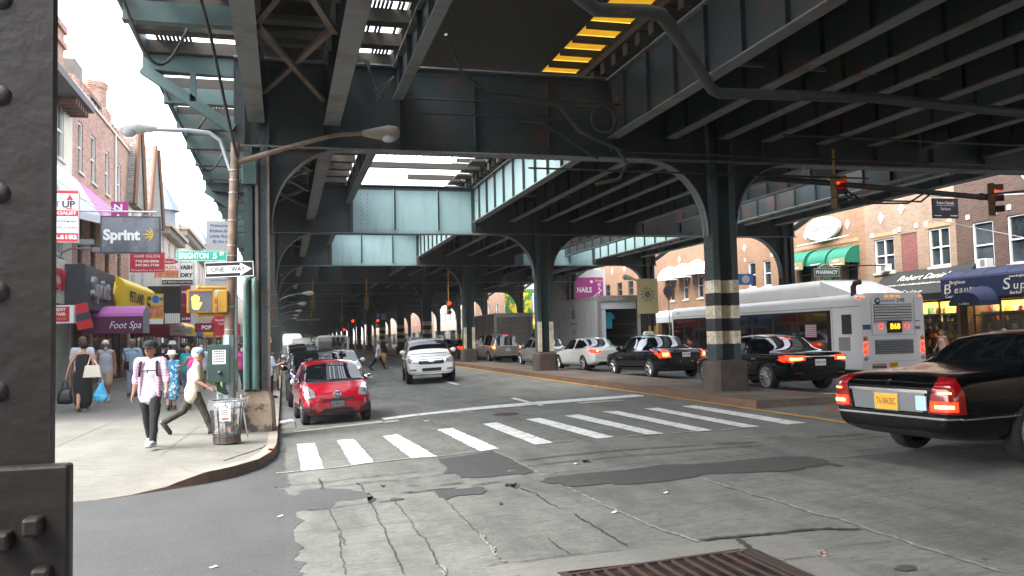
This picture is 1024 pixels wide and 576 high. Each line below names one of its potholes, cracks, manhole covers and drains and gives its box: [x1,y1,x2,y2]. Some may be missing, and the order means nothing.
drain grate [558,548,815,576]
crack [281,468,627,574]
